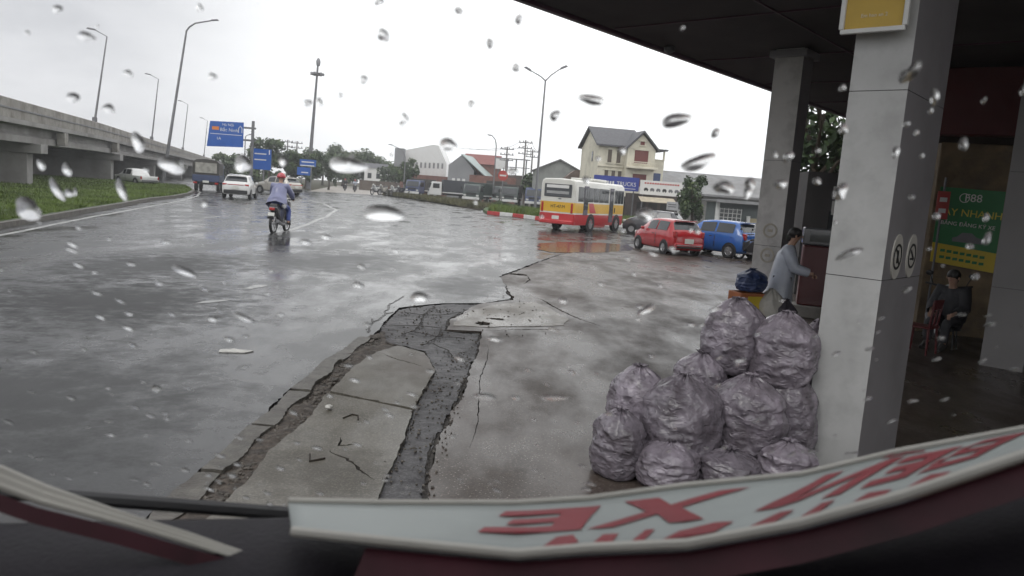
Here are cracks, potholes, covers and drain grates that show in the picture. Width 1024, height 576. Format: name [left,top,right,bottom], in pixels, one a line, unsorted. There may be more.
crack [177,259,547,520]
